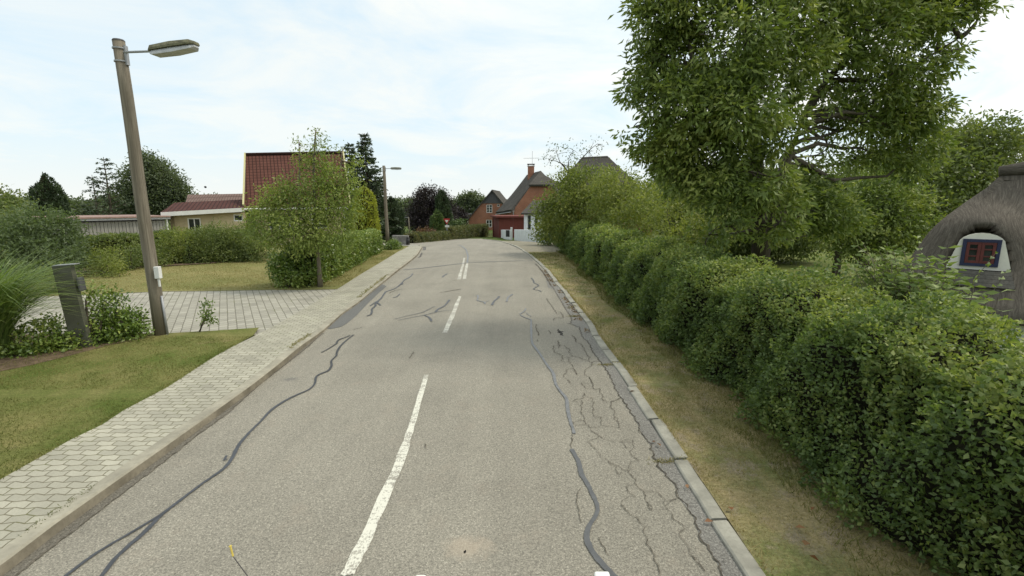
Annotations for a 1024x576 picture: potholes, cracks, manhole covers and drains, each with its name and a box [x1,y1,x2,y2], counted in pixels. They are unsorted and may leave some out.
crack [536,264,723,576]
